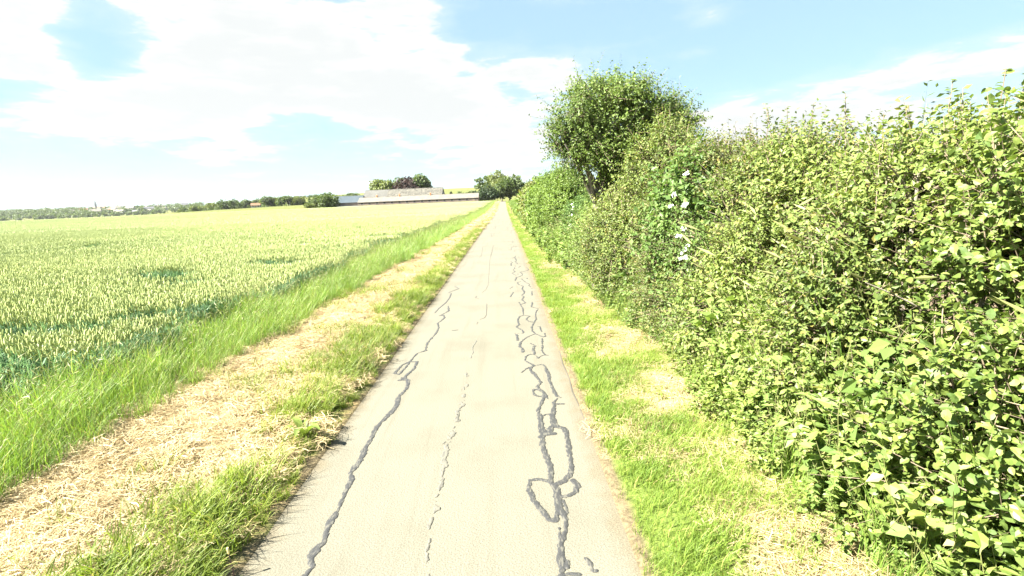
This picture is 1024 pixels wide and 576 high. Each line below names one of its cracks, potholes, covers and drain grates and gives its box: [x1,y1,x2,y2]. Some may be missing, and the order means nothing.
crack [559,350,585,420]
